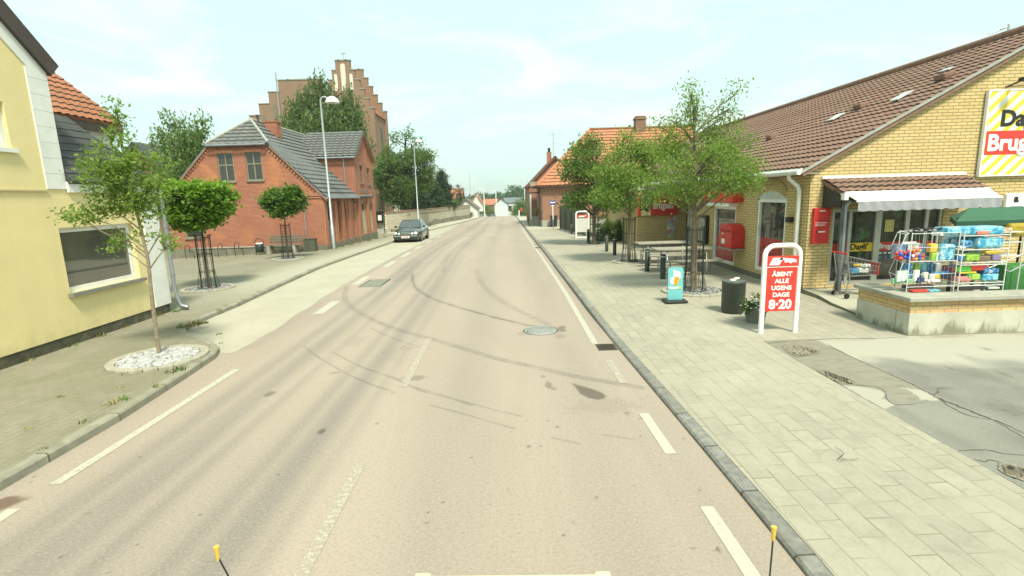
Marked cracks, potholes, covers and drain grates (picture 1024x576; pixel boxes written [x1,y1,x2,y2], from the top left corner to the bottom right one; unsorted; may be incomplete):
pothole [998,463,1024,481]
manhole cover [523,326,558,335]
pothole [816,369,856,385]
pothole [782,344,820,356]
crack [775,337,1024,438]
